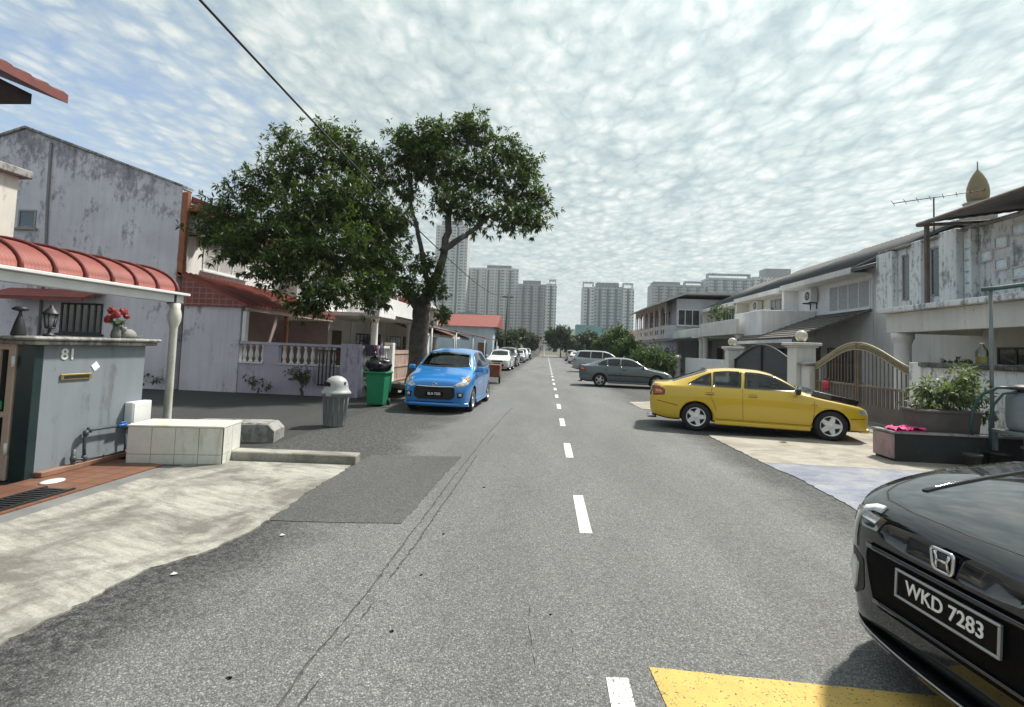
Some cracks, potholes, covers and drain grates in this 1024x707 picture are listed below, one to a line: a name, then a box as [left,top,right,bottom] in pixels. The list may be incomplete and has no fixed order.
drain grate [0,486,76,512]
